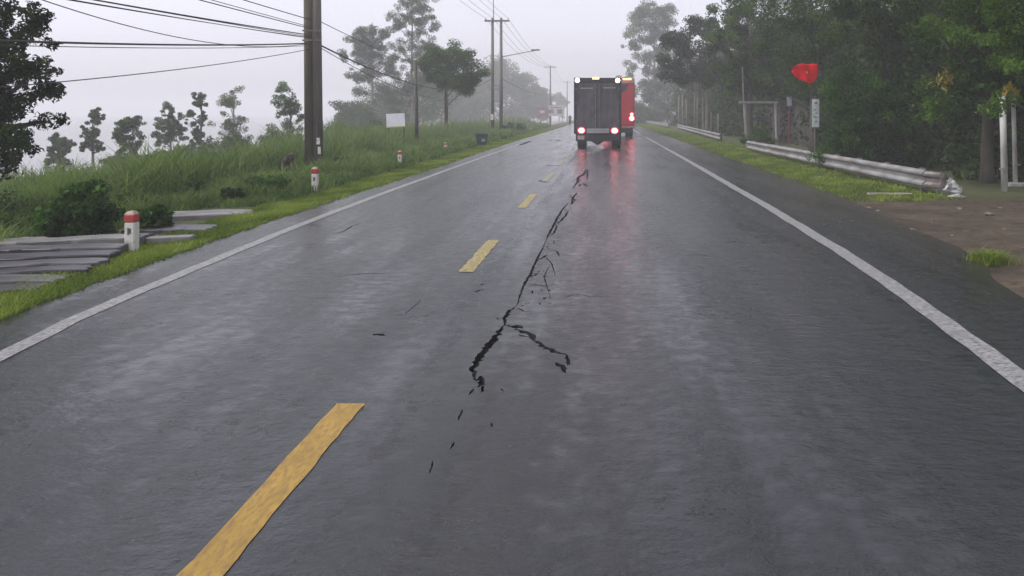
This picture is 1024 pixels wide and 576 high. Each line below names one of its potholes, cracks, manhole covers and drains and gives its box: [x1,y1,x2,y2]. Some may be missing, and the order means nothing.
crack [429,165,602,473]
